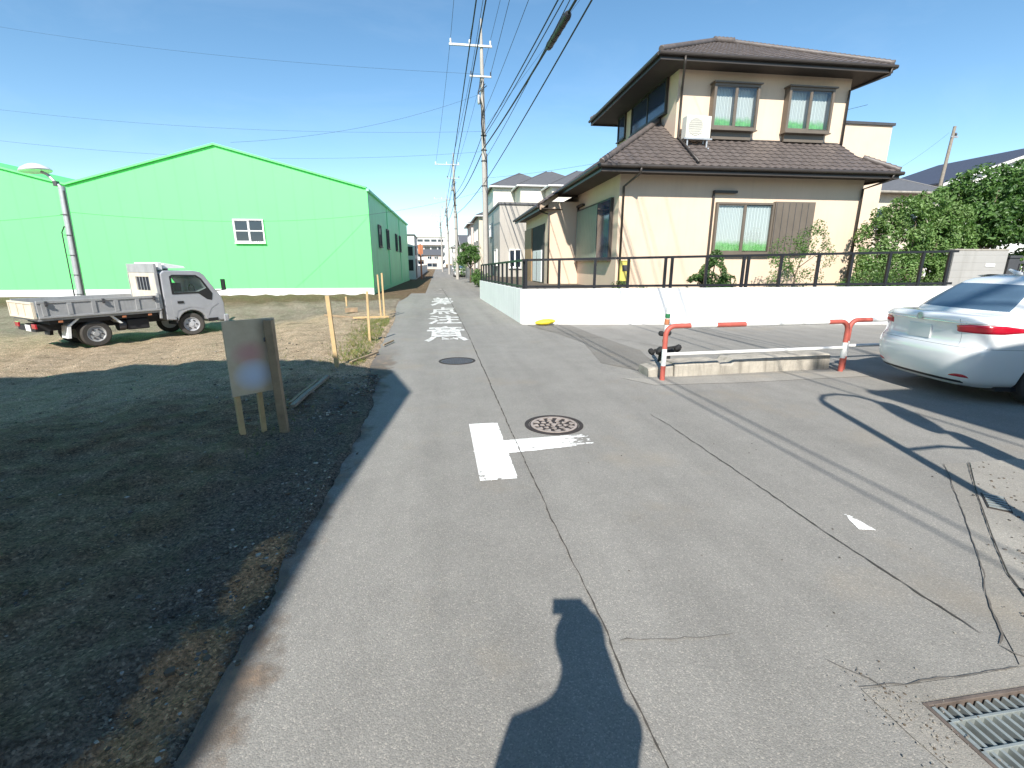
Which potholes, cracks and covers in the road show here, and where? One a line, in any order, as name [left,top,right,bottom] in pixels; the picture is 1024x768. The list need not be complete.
crack [652,415,1024,687]
crack [443,290,732,768]
drain grate [922,687,1024,768]
drain grate [980,492,1013,513]
manhole cover [525,415,583,435]
manhole cover [439,357,475,365]
